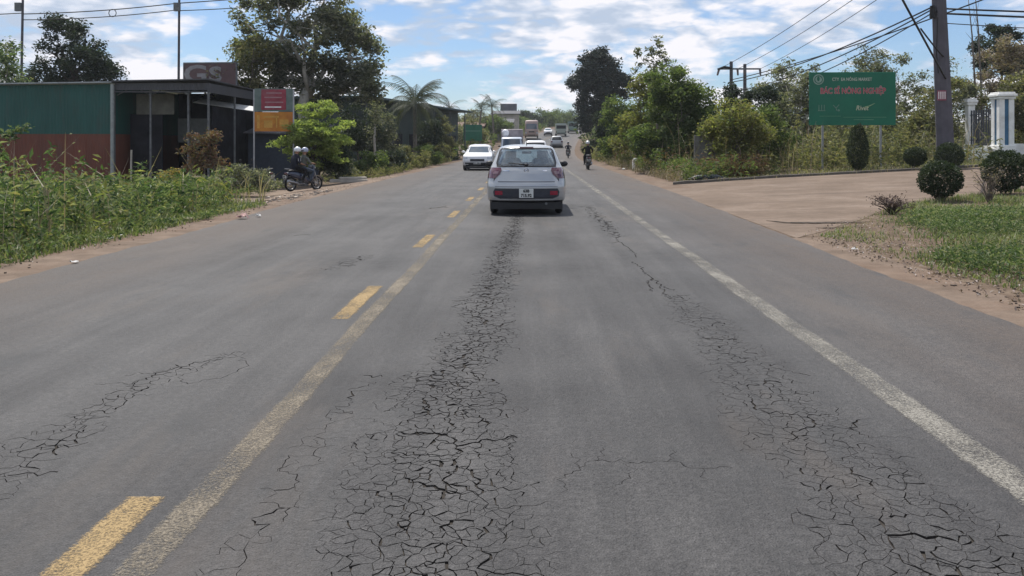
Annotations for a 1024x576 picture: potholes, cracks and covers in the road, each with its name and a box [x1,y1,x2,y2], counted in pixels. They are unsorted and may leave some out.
crack [309,209,566,576]
crack [557,450,732,491]
crack [661,294,1024,576]
crack [0,352,248,500]
crack [586,207,674,299]
